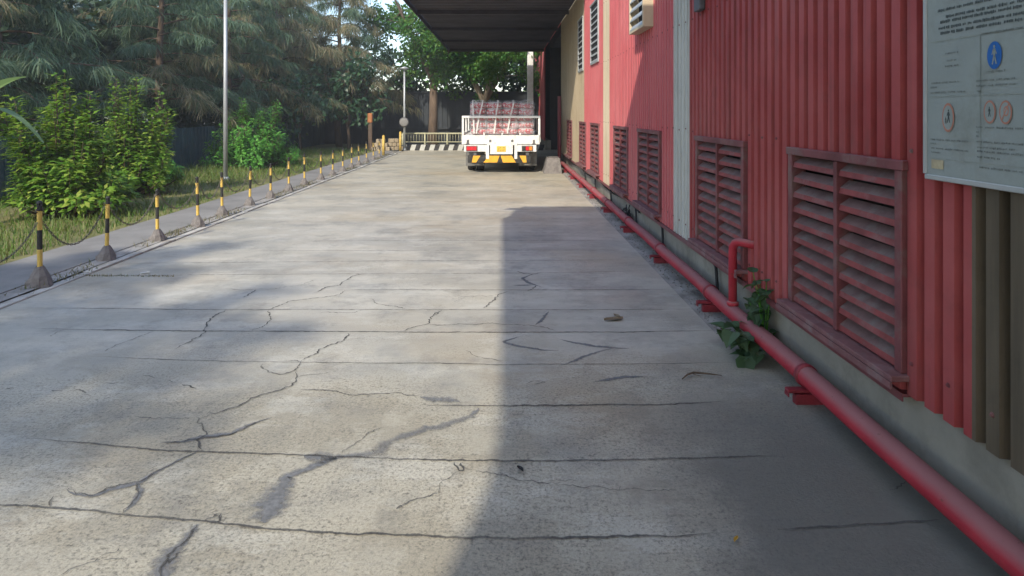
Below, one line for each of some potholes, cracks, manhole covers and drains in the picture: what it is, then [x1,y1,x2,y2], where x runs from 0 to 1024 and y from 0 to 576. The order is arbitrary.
crack [234,274,361,330]
crack [480,471,671,491]
crack [398,292,642,382]
crack [48,335,479,576]
